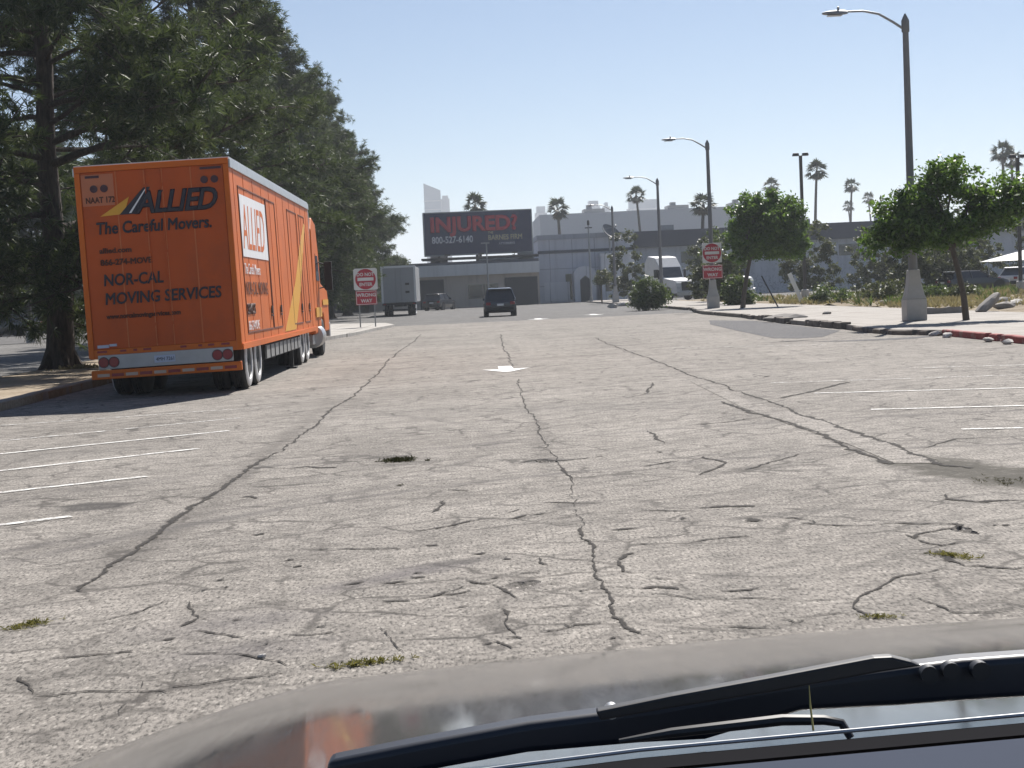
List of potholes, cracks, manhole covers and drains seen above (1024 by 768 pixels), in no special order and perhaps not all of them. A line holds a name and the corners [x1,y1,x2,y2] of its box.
crack [319,489,490,554]
crack [347,334,1023,653]
